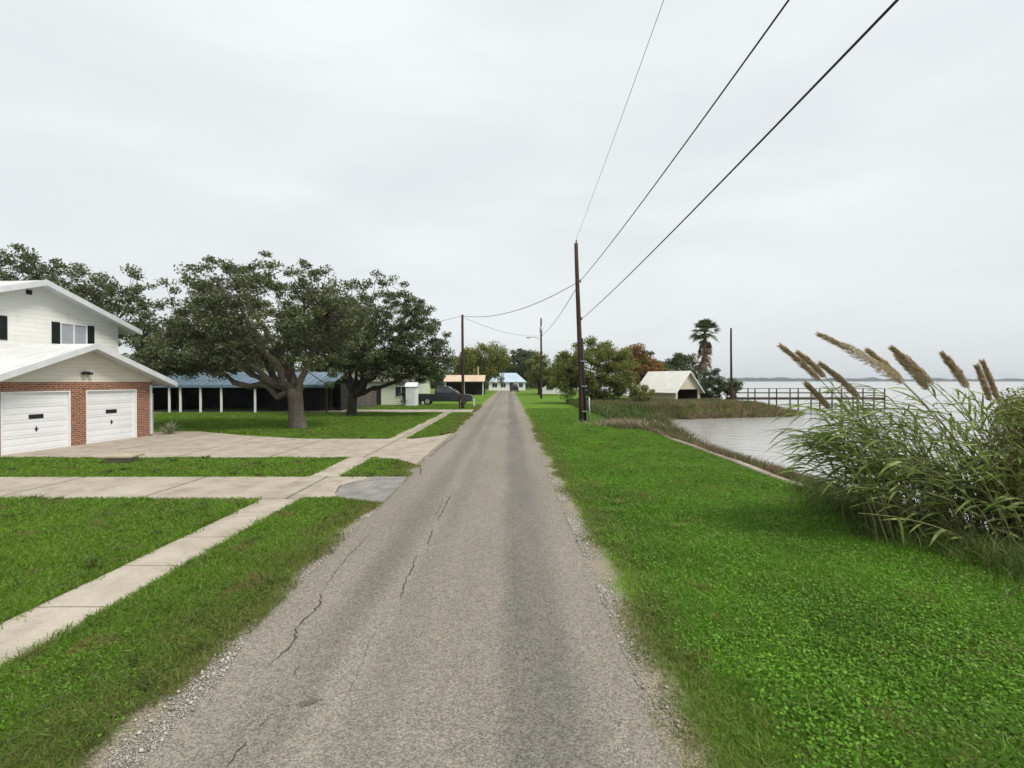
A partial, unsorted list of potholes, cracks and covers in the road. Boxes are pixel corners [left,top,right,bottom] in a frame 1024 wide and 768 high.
crack [266,538,365,676]
